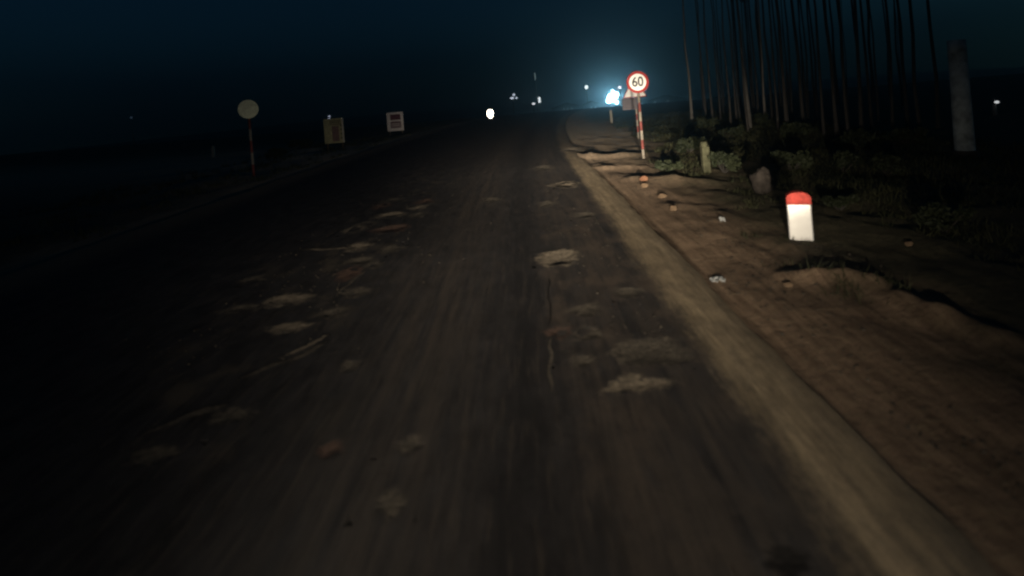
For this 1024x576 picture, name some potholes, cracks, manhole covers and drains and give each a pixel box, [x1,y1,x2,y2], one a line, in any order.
pothole [525,247,589,271]
pothole [585,370,703,406]
pothole [259,290,328,313]
pothole [593,331,715,381]
pothole [250,318,325,343]
pothole [362,209,416,221]
pothole [536,179,589,190]
